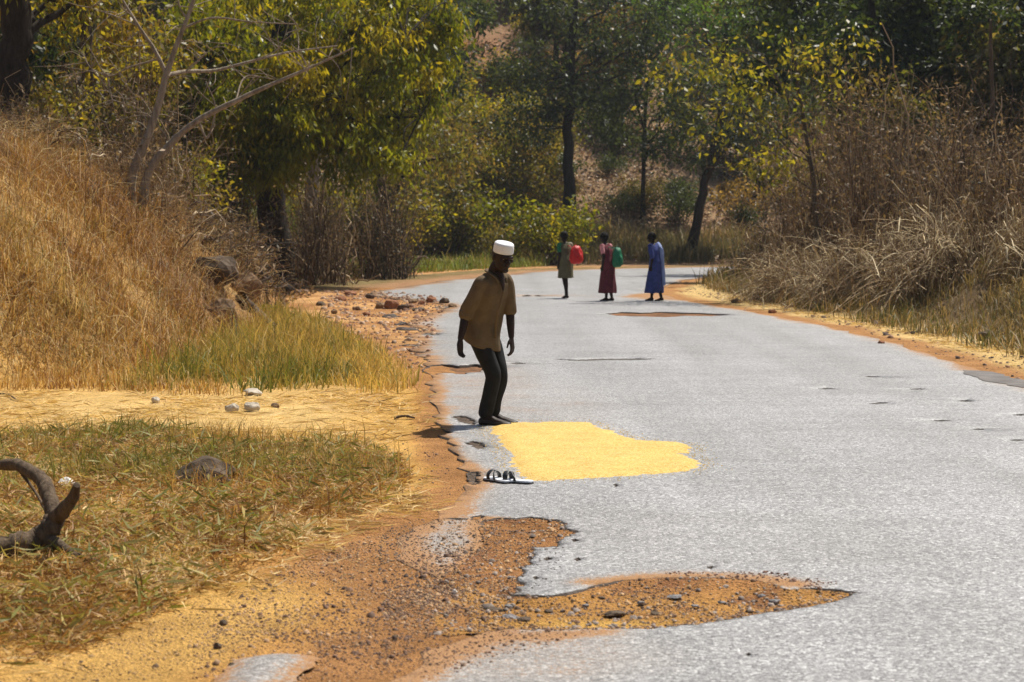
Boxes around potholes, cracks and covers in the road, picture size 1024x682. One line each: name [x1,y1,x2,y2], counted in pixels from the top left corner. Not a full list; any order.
pothole [434,516,859,636]
